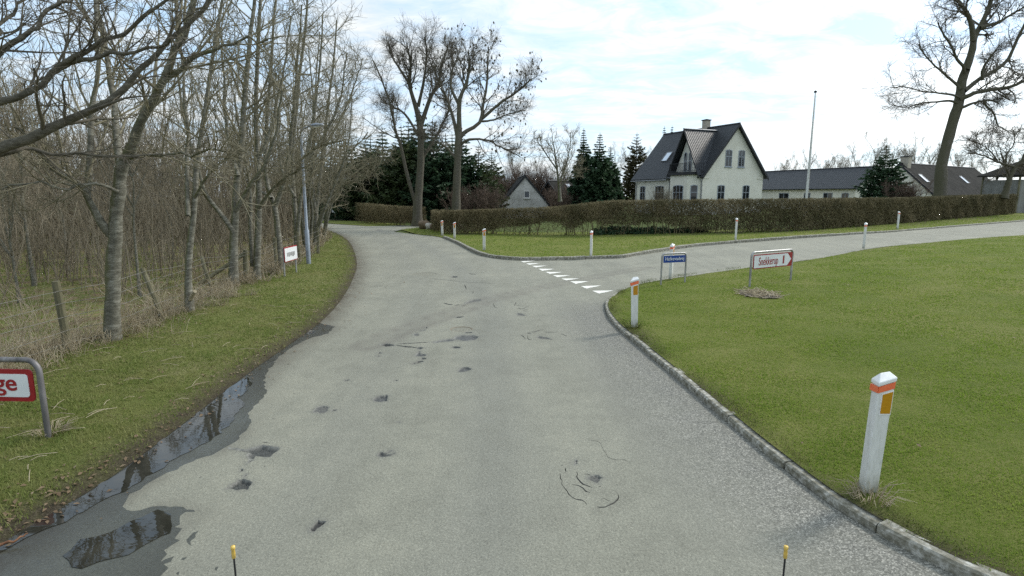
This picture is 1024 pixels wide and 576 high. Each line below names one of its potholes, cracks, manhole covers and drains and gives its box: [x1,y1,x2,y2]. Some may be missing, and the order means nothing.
crack [560,441,628,508]
pothole [228,445,279,463]
pothole [225,479,252,490]
pothole [432,335,478,343]
